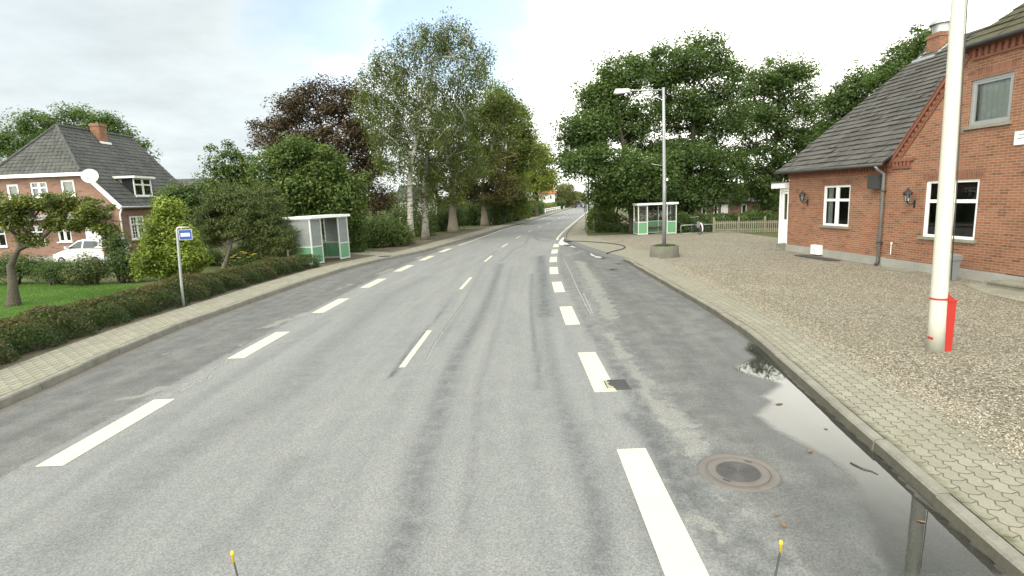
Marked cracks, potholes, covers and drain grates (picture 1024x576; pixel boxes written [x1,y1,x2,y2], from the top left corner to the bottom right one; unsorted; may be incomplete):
manhole cover [698,453,781,492]
crack [169,359,229,398]
